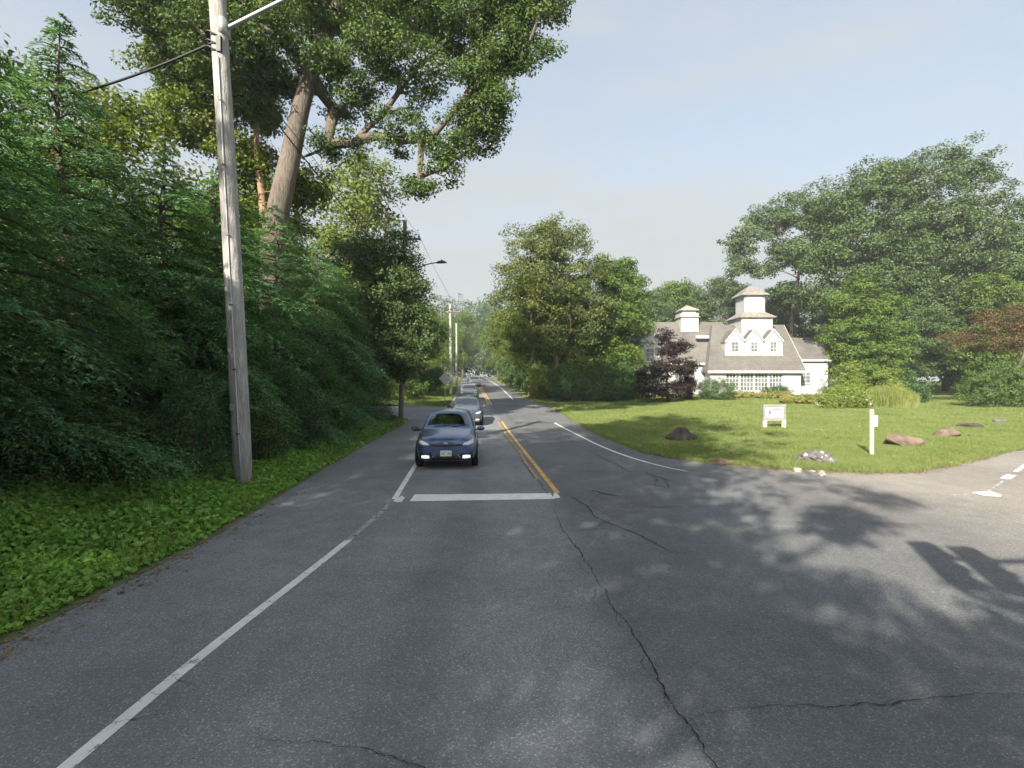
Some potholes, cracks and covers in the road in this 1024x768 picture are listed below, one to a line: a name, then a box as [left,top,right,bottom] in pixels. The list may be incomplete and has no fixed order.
crack [257,733,425,768]
crack [574,490,672,553]
crack [544,502,718,768]
crack [703,693,1018,714]
